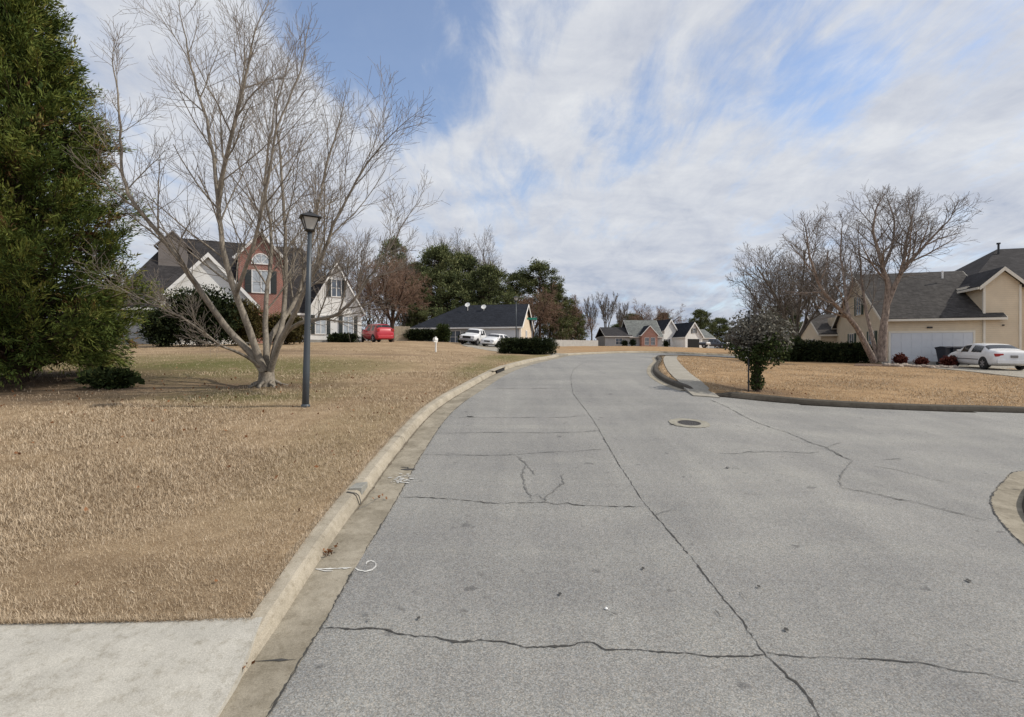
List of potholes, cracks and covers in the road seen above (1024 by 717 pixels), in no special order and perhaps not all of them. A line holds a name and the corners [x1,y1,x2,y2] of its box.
crack [270,371,1023,717]
manhole cover [668,418,710,428]
